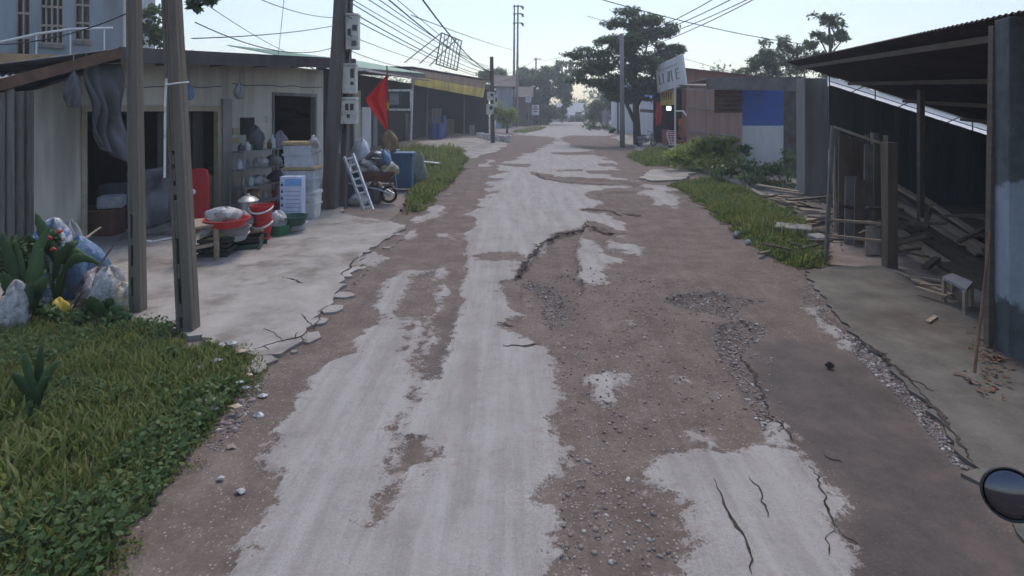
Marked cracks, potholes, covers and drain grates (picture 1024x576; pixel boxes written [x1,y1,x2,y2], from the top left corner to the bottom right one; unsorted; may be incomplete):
pothole [659,292,735,316]
crack [714,476,769,574]
crack [737,353,793,441]
crack [809,455,858,553]
crack [515,209,642,280]
pothole [716,320,766,358]
crack [259,306,326,349]
